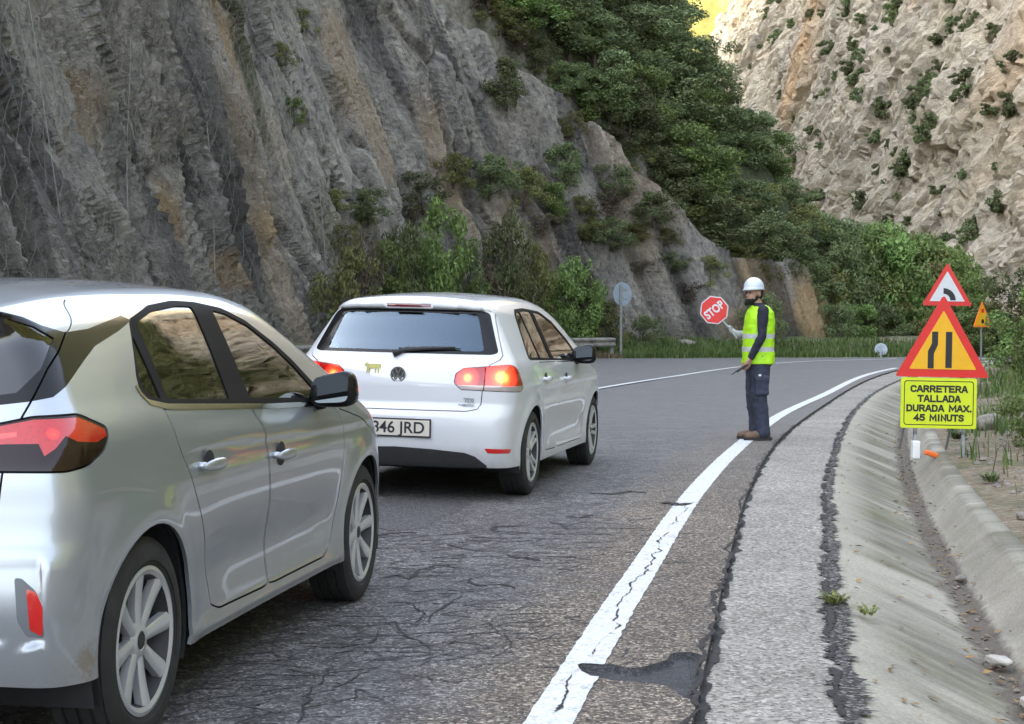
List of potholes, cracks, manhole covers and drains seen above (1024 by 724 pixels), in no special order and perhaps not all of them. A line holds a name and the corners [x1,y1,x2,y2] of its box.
crack [161,425,792,724]
